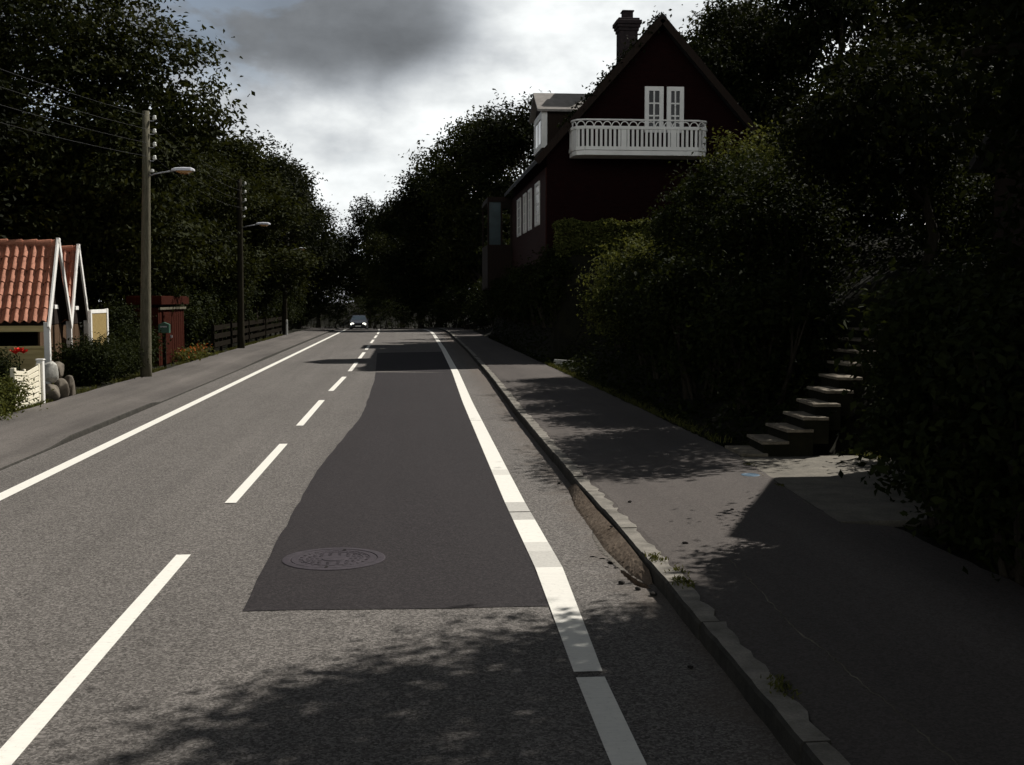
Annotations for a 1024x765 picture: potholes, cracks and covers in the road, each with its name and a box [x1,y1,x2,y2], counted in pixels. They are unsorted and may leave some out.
manhole cover [282,547,385,570]
pothole [620,570,651,589]
